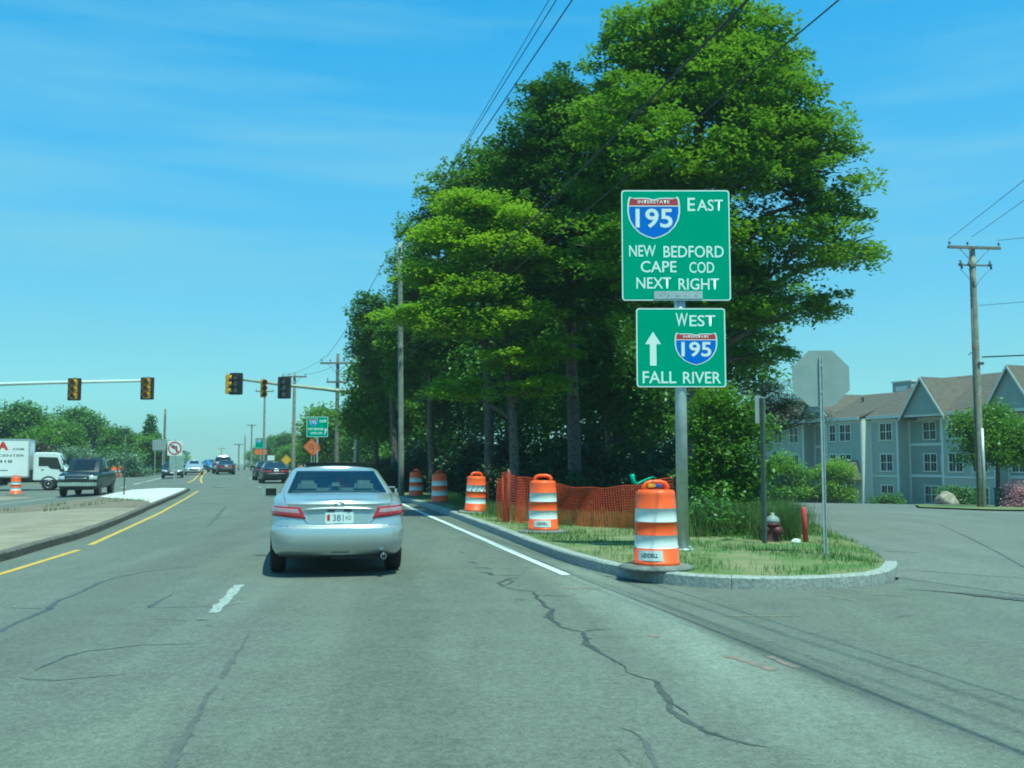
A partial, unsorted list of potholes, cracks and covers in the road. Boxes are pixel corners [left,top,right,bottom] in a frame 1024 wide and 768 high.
crack [20,643,198,682]
crack [463,552,773,768]
